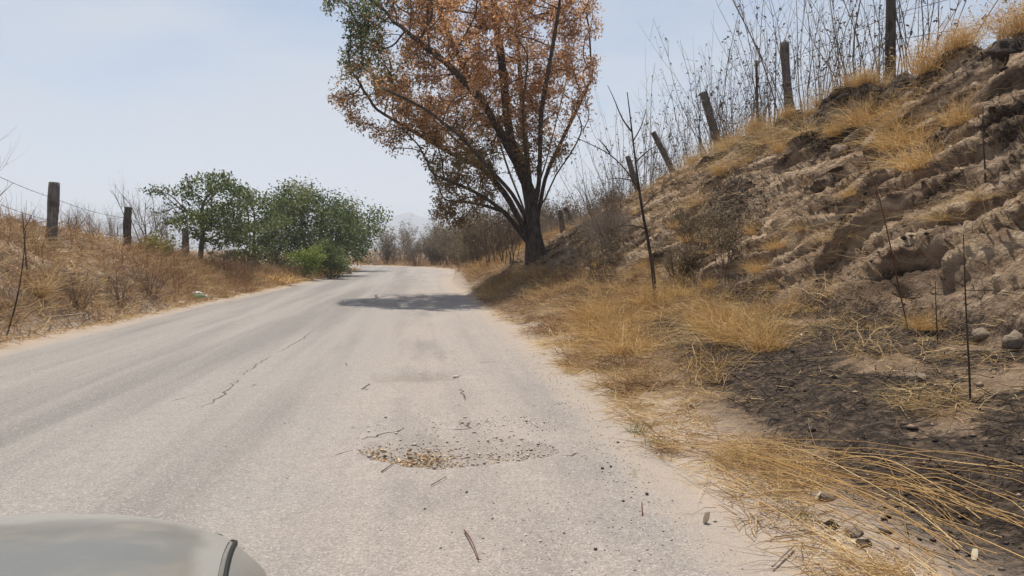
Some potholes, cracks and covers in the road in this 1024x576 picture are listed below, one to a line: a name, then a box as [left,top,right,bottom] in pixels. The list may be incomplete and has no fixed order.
crack [171,332,311,407]
pothole [357,433,560,470]
